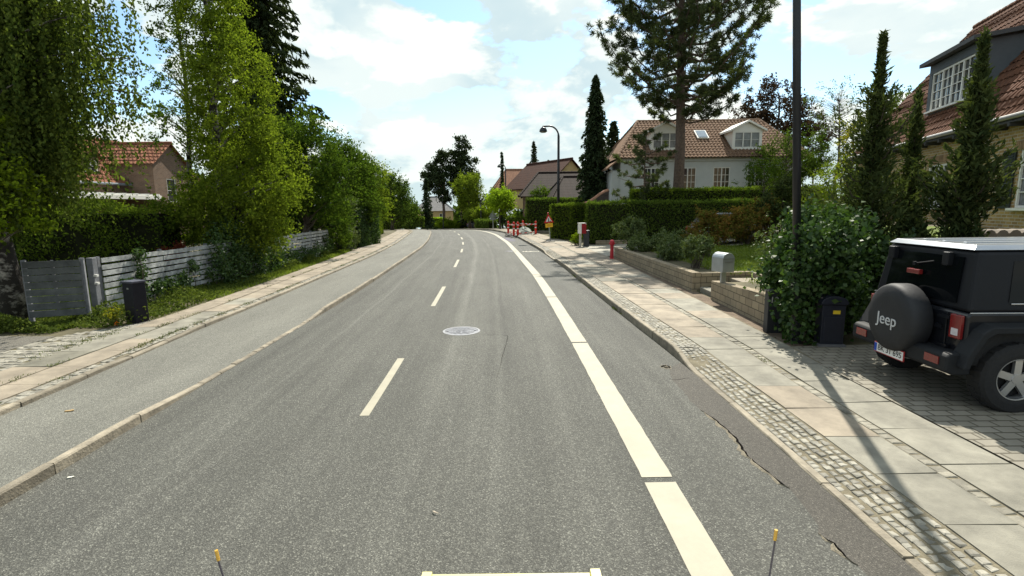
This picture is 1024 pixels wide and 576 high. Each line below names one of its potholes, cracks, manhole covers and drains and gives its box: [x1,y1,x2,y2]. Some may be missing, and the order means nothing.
manhole cover [443,327,480,336]
crack [701,410,790,489]
crack [818,532,858,566]
